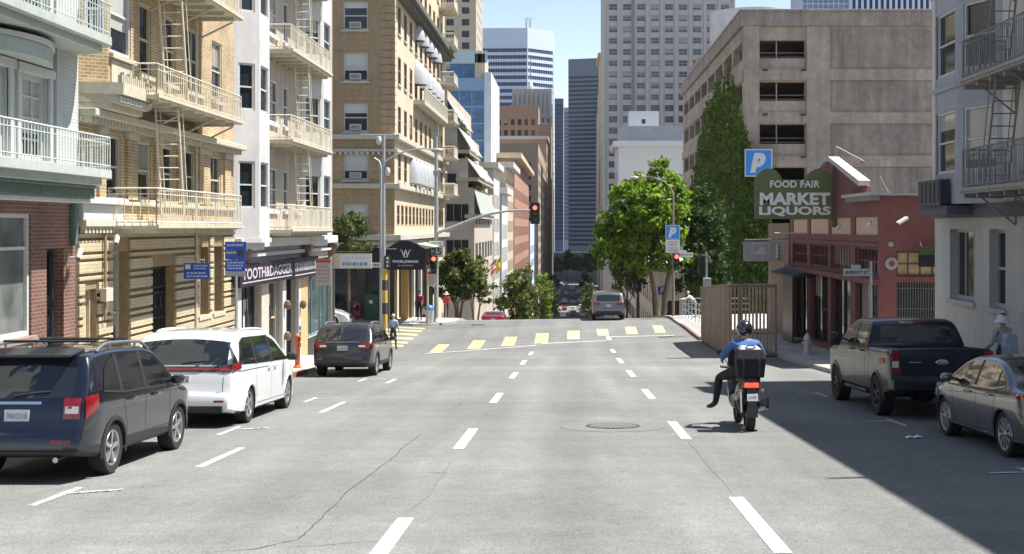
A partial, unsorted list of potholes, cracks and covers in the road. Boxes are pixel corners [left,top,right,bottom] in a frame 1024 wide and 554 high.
manhole cover [560,421,666,432]
crack [209,436,418,552]
